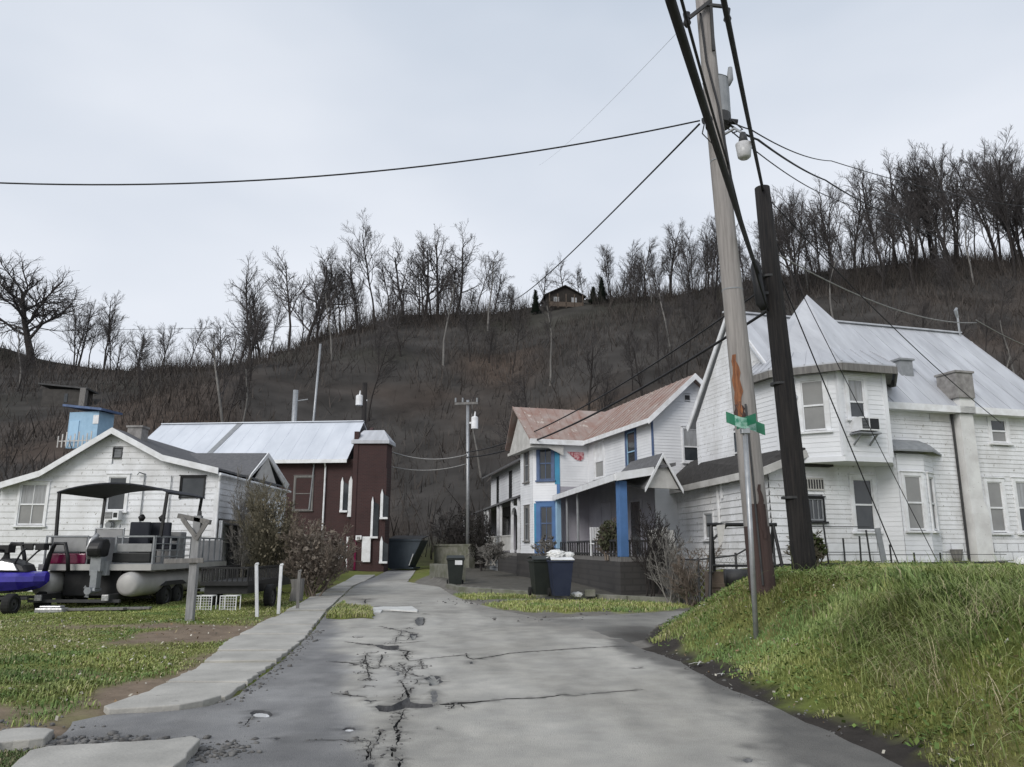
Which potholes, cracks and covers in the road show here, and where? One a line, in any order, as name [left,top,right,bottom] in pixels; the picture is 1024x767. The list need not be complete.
crack [340,601,615,767]
